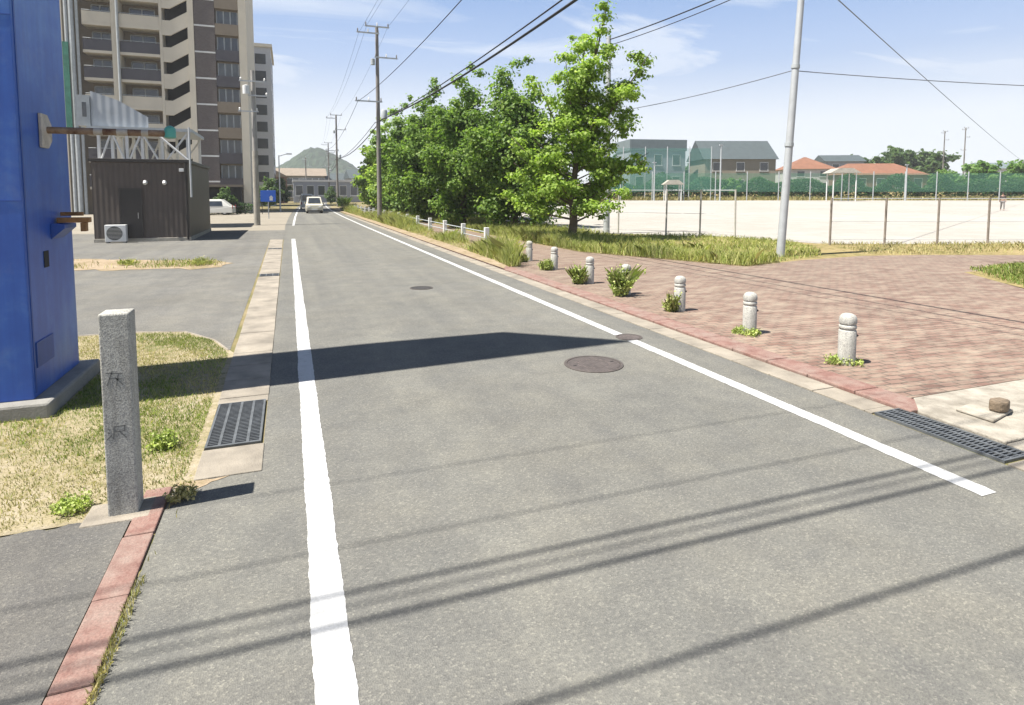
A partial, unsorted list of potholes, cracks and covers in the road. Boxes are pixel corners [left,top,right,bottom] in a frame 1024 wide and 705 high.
drain grate [204,399,266,451]
manhole cover [564,356,624,373]
drain grate [874,408,1024,464]
